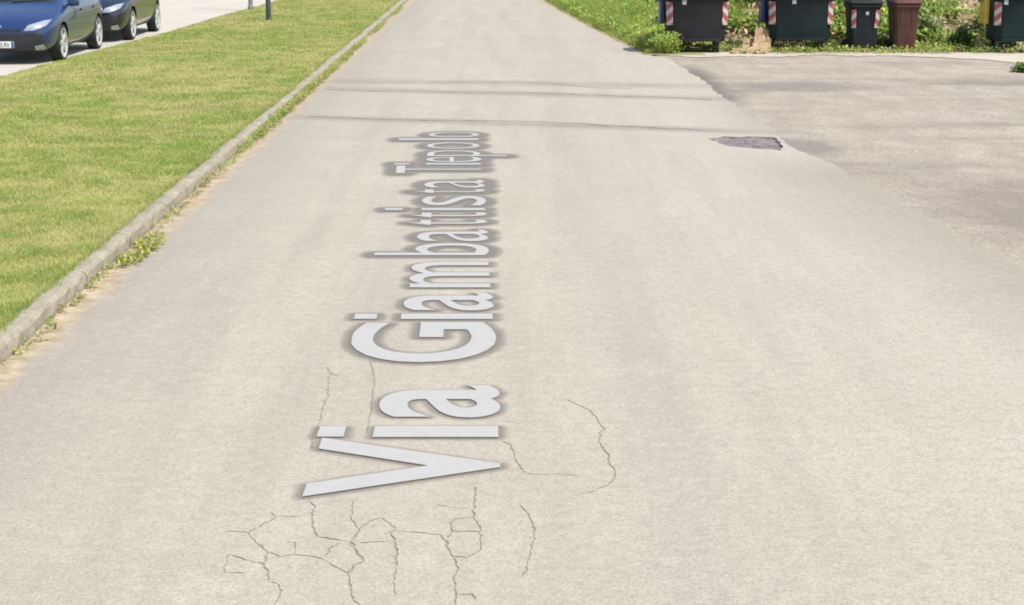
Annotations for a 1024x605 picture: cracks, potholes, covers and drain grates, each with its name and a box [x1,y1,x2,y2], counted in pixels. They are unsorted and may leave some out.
crack [367,362,375,431]
crack [223,487,482,605]
crack [520,505,536,576]
crack [502,400,616,495]
crack [310,367,337,450]
